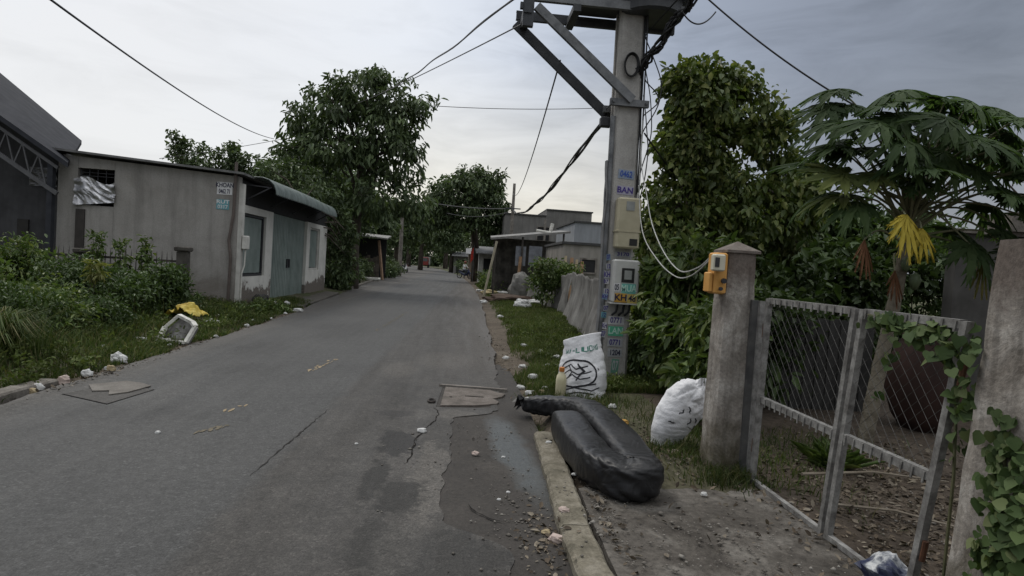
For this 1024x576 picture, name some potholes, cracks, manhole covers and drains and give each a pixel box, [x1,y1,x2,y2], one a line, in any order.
crack [407,409,439,462]
manhole cover [427,384,507,407]
